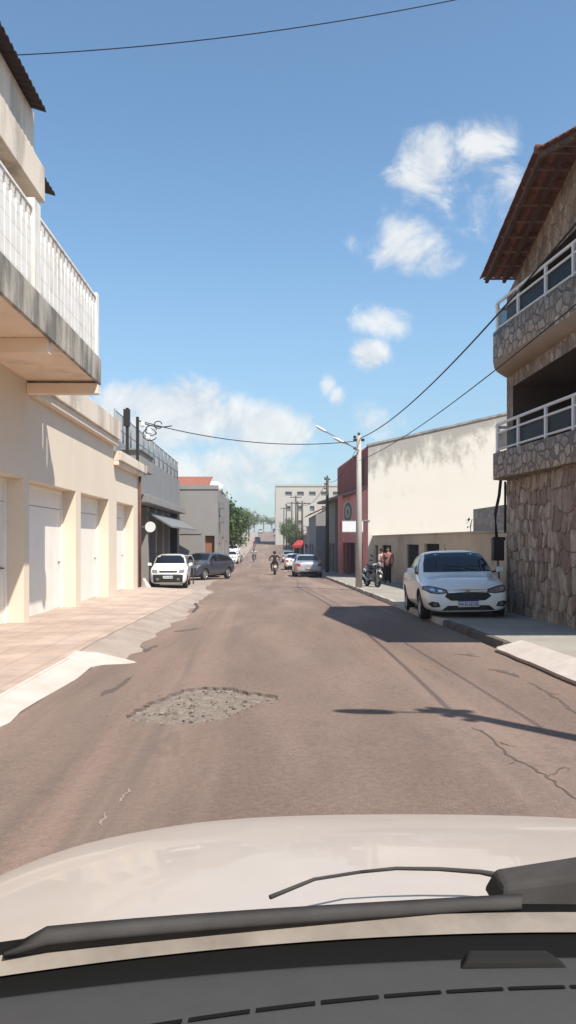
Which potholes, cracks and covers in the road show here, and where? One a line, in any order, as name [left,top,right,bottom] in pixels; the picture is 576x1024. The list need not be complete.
pothole [105,681,283,728]
crack [459,653,576,799]
crack [98,787,131,828]
